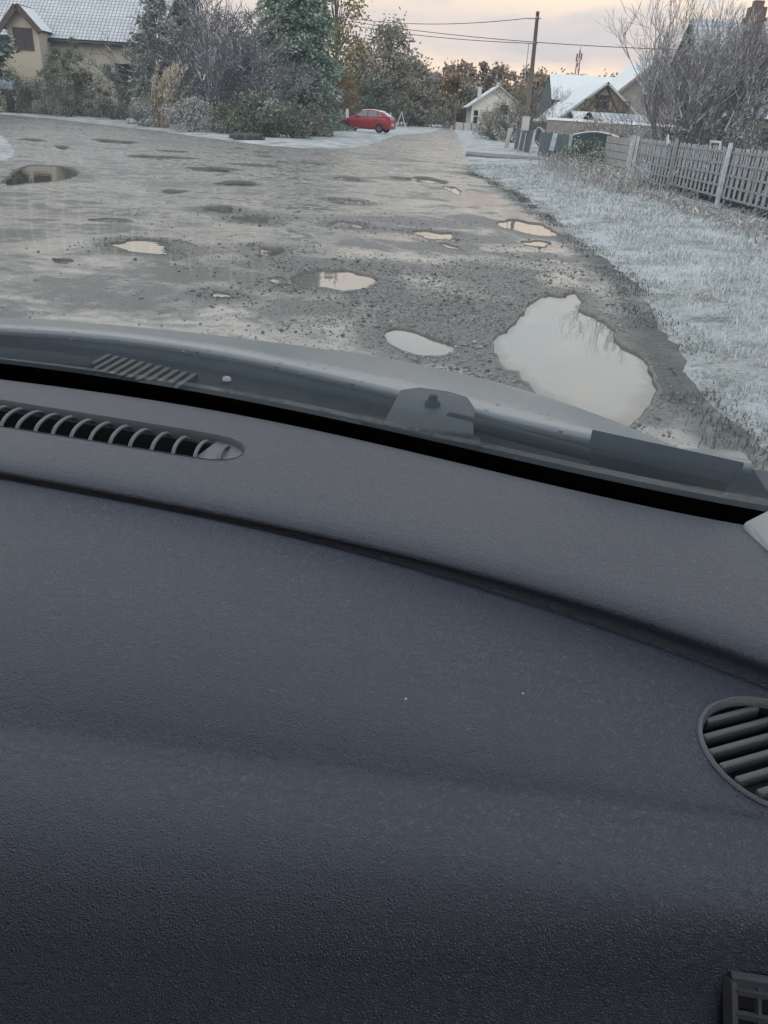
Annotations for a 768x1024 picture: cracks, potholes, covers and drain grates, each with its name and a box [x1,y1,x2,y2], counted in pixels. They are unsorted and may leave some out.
pothole [107,238,177,255]
pothole [201,205,235,214]
pothole [413,176,449,184]
pothole [520,240,552,248]
pothole [490,290,663,428]
pothole [495,219,560,237]
pothole [0,164,81,186]
pothole [287,268,382,292]
pothole [410,229,455,240]
pothole [381,326,458,358]
